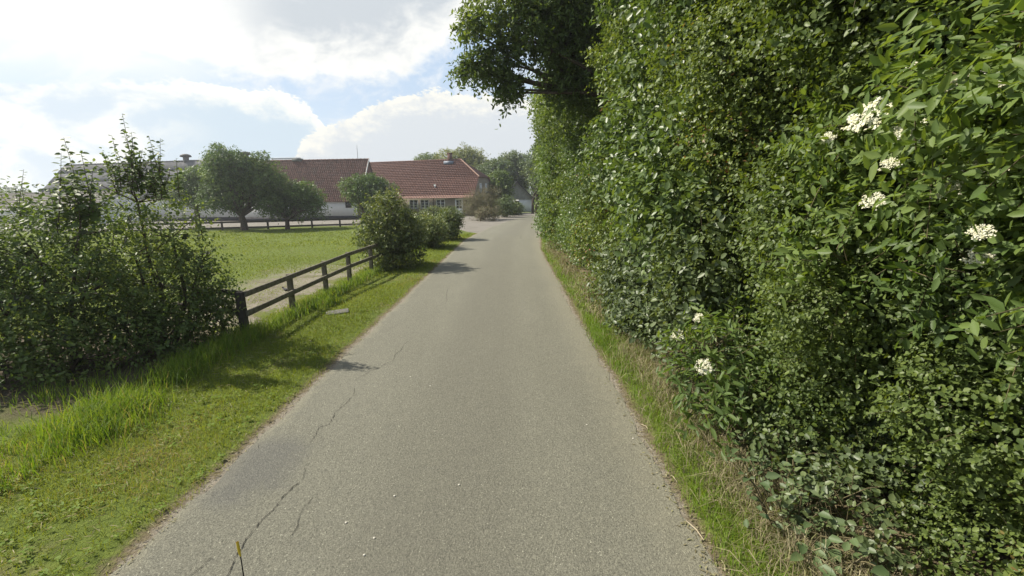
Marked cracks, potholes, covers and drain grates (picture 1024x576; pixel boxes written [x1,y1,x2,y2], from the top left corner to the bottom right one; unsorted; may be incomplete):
crack [227,467,314,576]
